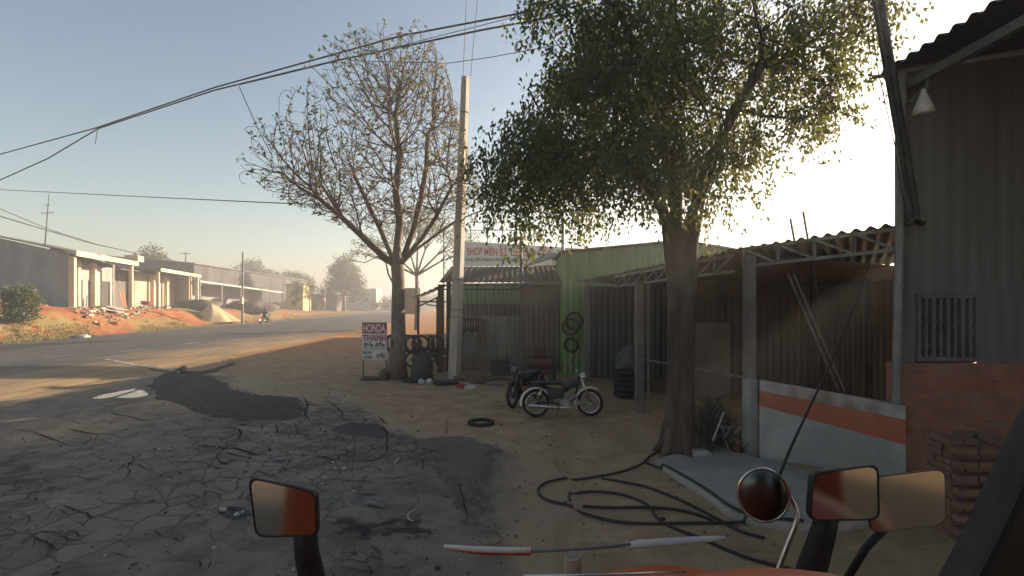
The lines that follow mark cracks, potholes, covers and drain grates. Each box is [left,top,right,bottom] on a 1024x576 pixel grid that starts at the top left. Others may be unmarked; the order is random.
crack [21,400,159,481]
crack [340,546,408,573]
crack [11,504,96,556]
crack [169,399,447,495]
